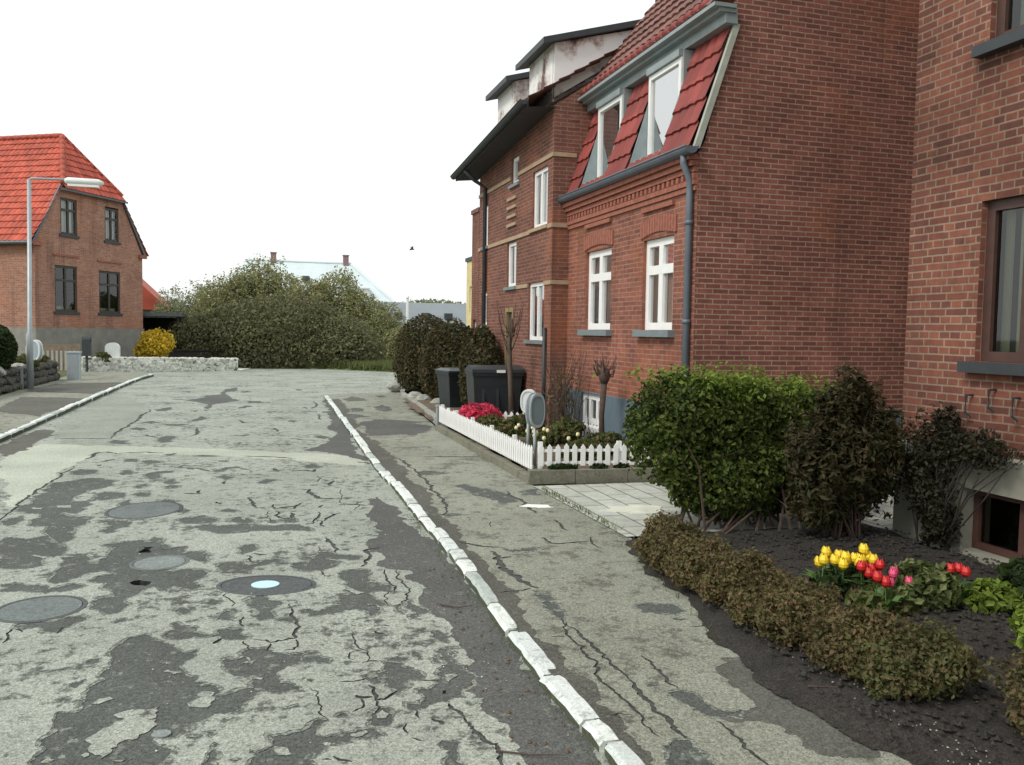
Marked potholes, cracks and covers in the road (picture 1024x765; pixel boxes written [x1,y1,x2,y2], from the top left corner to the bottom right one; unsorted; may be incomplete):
crack [3,629,23,643]
crack [399,456,456,515]
crack [401,703,504,765]
crack [243,456,361,553]
manhole cover [104,501,183,519]
crack [458,520,597,592]
crack [311,547,411,721]
manhole cover [216,575,316,596]
manhole cover [129,555,189,571]
manhole cover [0,595,88,624]
